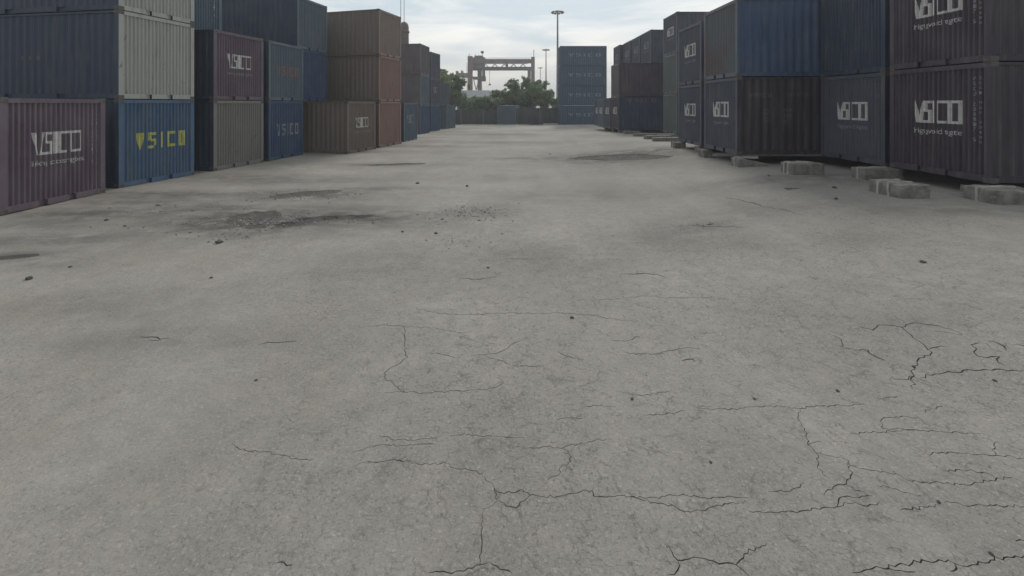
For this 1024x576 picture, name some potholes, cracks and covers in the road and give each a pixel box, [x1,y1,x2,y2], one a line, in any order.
crack [557,390,683,420]
crack [429,513,512,574]
crack [354,434,748,515]
pothole [269,190,343,199]
crack [692,396,1024,513]
crack [664,542,767,576]
crack [367,324,534,394]
crack [852,539,1024,573]
crack [416,296,699,362]
pothole [226,210,282,230]
pothole [275,214,375,228]
crack [830,323,1024,389]
